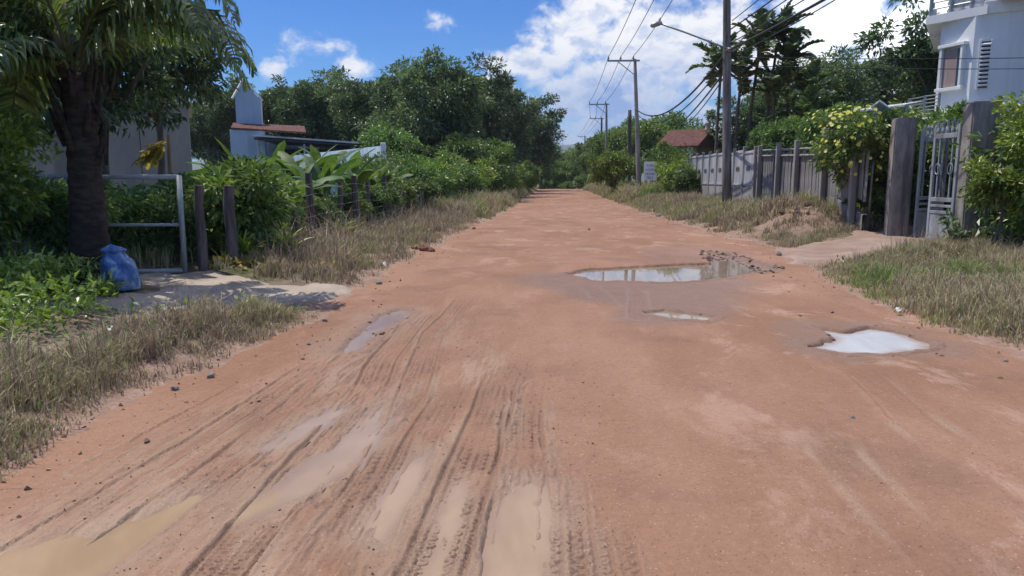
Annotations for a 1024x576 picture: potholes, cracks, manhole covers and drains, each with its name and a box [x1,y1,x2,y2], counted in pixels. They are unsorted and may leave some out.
pothole [322,306,423,358]
pothole [557,250,786,284]
pothole [795,324,947,357]
pothole [632,307,727,323]
